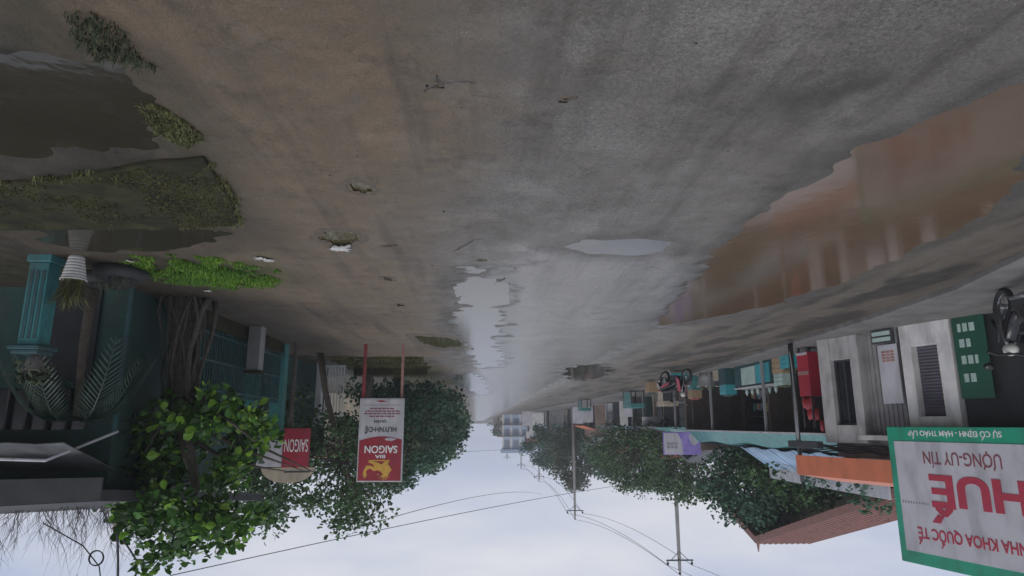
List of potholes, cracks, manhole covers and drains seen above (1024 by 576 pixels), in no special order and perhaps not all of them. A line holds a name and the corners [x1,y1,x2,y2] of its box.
crack [424,75,476,93]
pothole [405,333,475,351]
pothole [309,227,369,248]
pothole [340,180,379,196]
